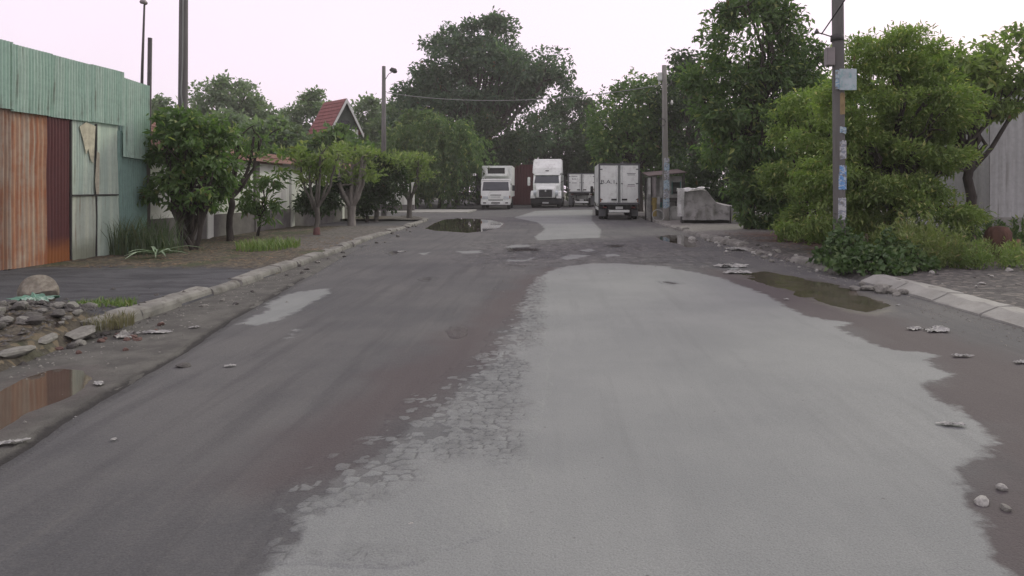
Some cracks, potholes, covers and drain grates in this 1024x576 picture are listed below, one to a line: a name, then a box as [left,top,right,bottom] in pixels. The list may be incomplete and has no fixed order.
pothole [445,325,468,339]
